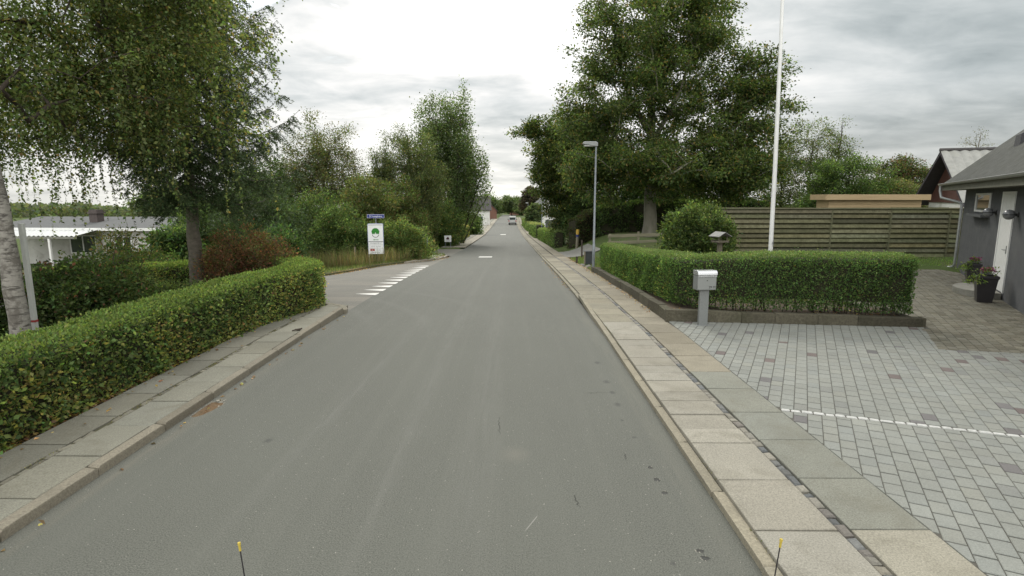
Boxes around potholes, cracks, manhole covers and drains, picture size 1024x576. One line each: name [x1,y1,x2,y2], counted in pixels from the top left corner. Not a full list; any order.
pothole [189,400,226,417]
